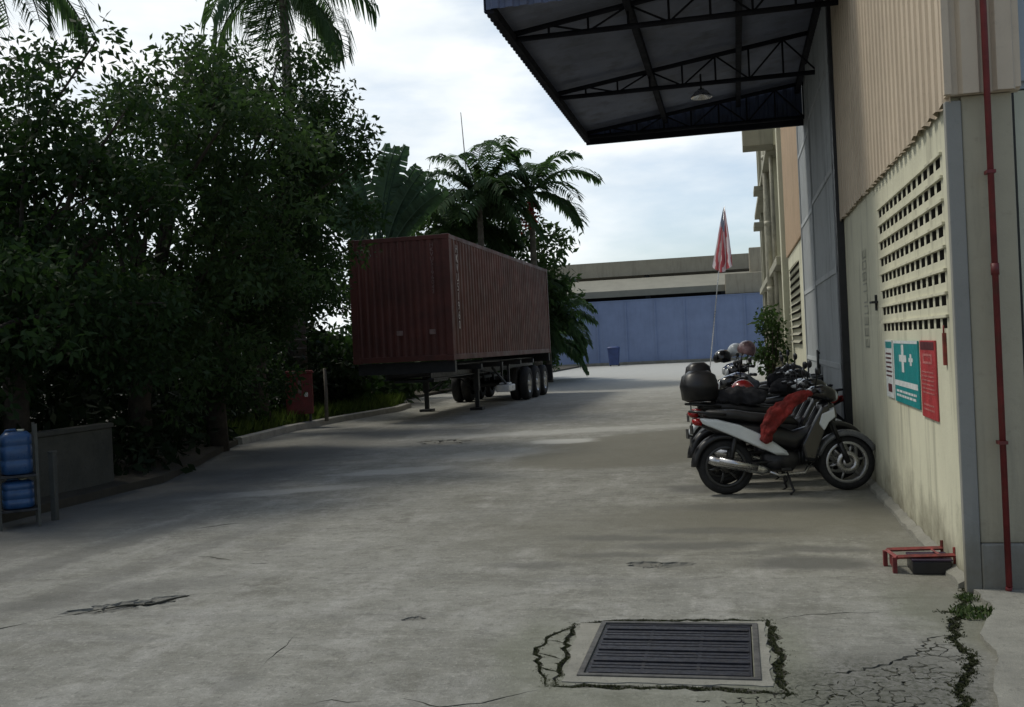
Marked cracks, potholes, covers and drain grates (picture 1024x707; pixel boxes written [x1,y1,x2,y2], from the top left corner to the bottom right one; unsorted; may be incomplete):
crack [399,689,542,707]
pothole [58,599,154,615]
pothole [626,561,697,569]
drain grate [561,621,774,687]
crack [777,612,875,620]
crack [696,635,966,707]
